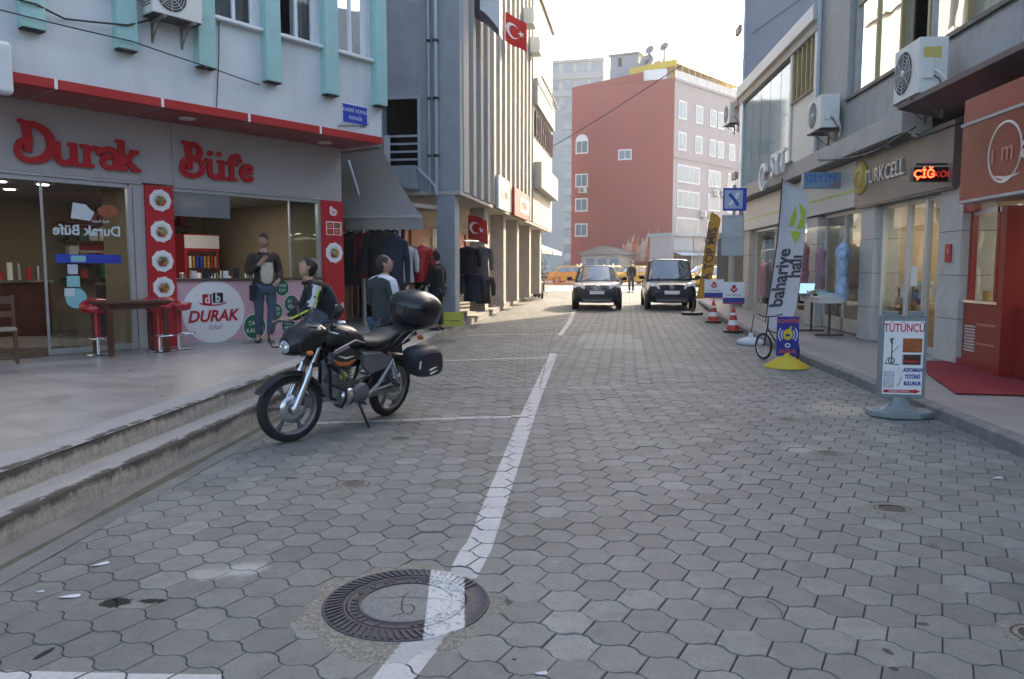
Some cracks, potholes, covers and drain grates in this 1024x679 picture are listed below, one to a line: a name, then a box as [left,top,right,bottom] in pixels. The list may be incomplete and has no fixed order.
manhole cover [382,436,416,444]
manhole cover [863,502,919,518]
manhole cover [285,562,508,670]
manhole cover [329,479,374,492]
manhole cover [807,450,853,461]
